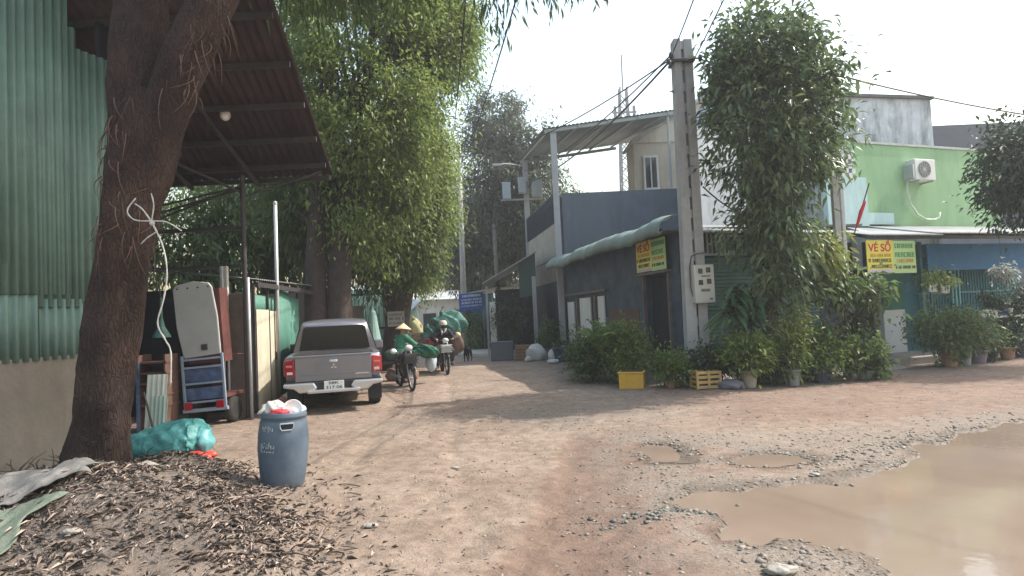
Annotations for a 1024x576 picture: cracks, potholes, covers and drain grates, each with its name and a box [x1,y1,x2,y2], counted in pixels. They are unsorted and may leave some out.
pothole [629,441,705,465]
pothole [663,418,1024,576]
